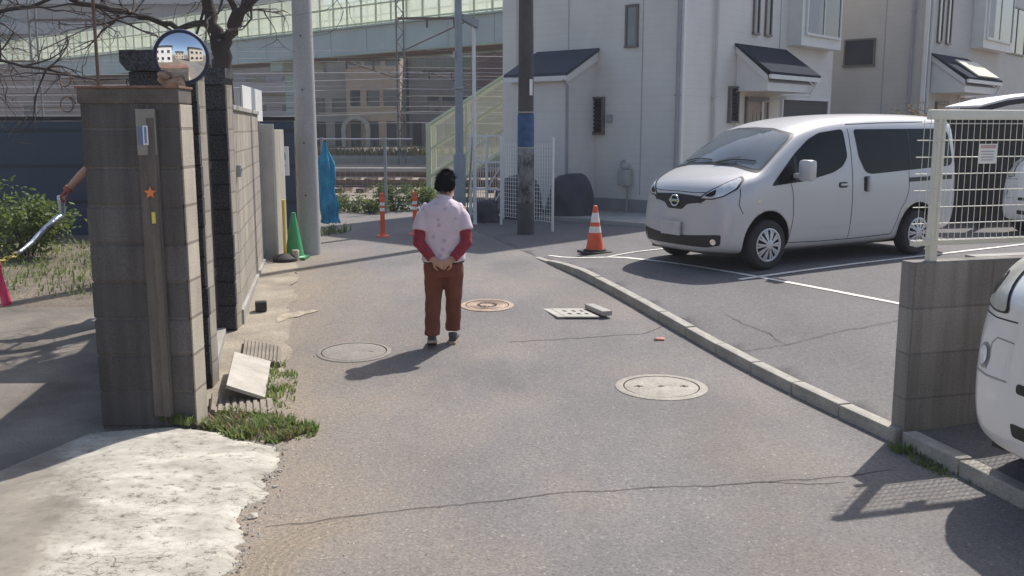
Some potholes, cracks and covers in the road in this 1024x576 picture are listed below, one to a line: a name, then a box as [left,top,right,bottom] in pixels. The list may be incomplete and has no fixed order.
crack [727,315,898,351]
manhole cover [316,342,391,363]
manhole cover [615,374,708,401]
crack [266,469,892,527]
manhole cover [461,299,514,312]
